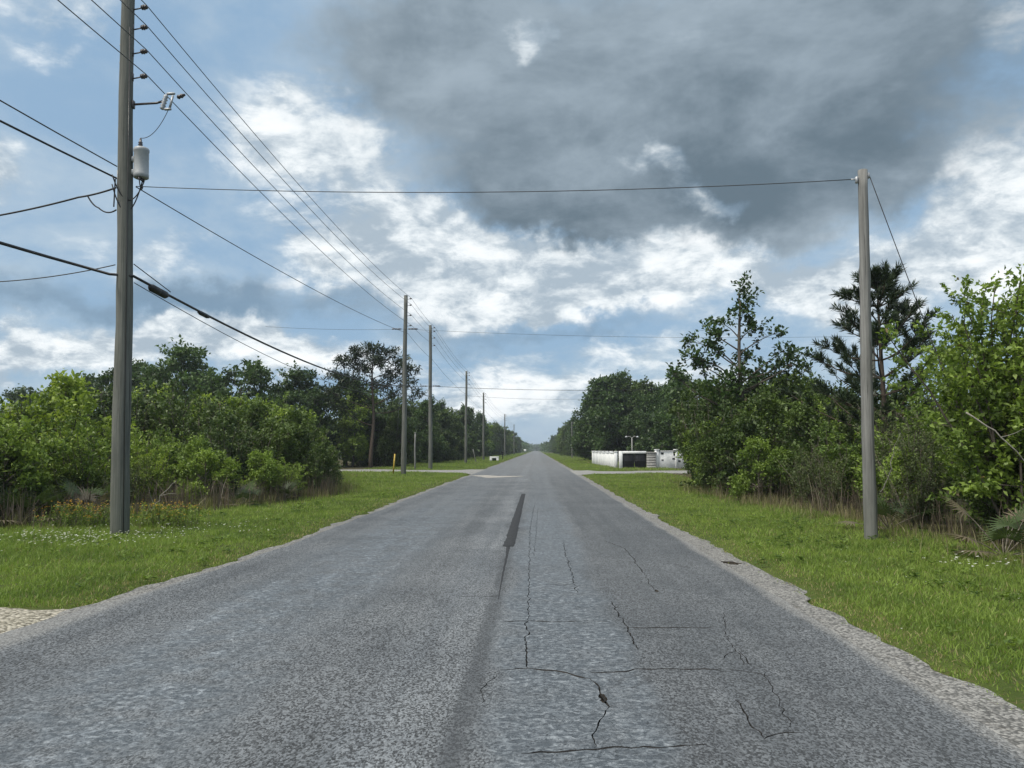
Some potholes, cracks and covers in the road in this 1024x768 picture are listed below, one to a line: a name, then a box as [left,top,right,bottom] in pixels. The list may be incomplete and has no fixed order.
crack [480,506,801,754]
